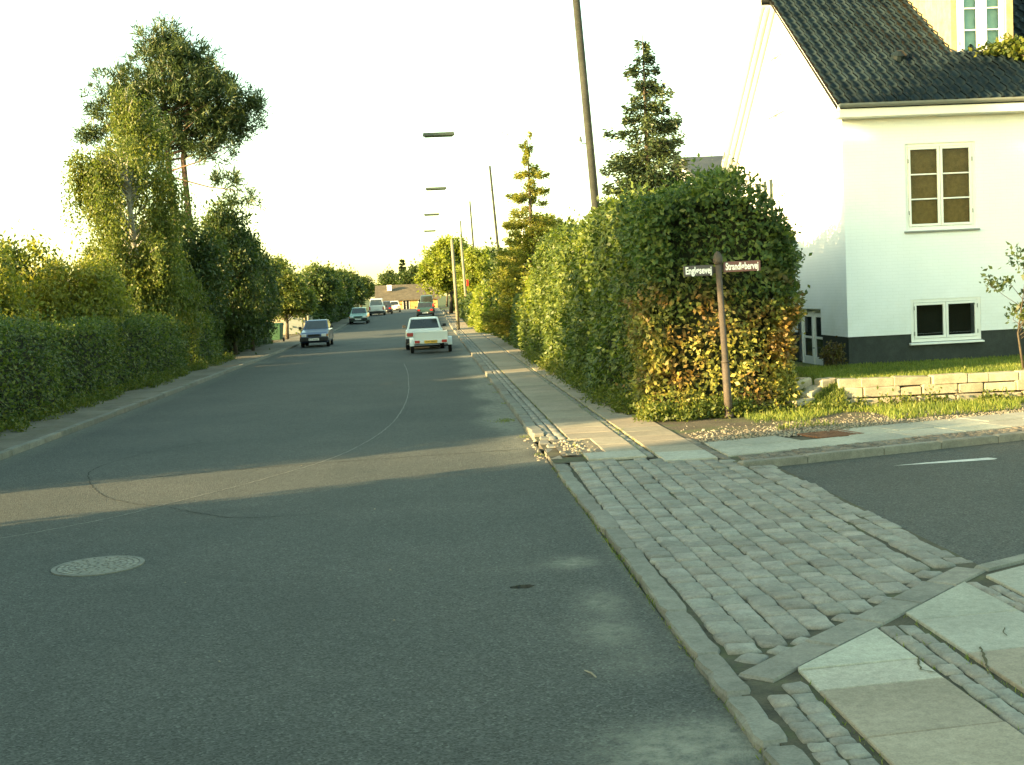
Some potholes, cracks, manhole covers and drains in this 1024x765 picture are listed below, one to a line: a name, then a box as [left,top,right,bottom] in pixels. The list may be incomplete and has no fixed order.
manhole cover [51,555,145,577]
utility cover [797,429,863,439]
crack [979,627,1007,674]
